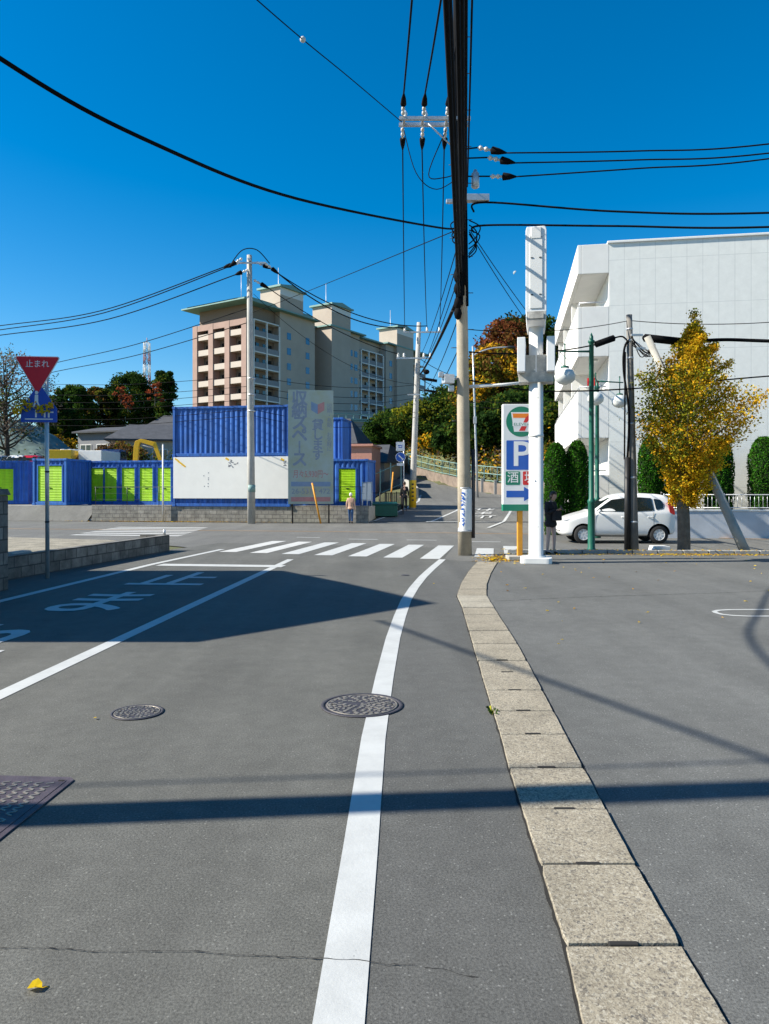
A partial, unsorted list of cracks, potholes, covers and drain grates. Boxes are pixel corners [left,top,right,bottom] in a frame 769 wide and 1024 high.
manhole cover [110,704,164,721]
crack [0,947,405,965]
manhole cover [321,693,403,718]
utility cover [0,775,74,840]
